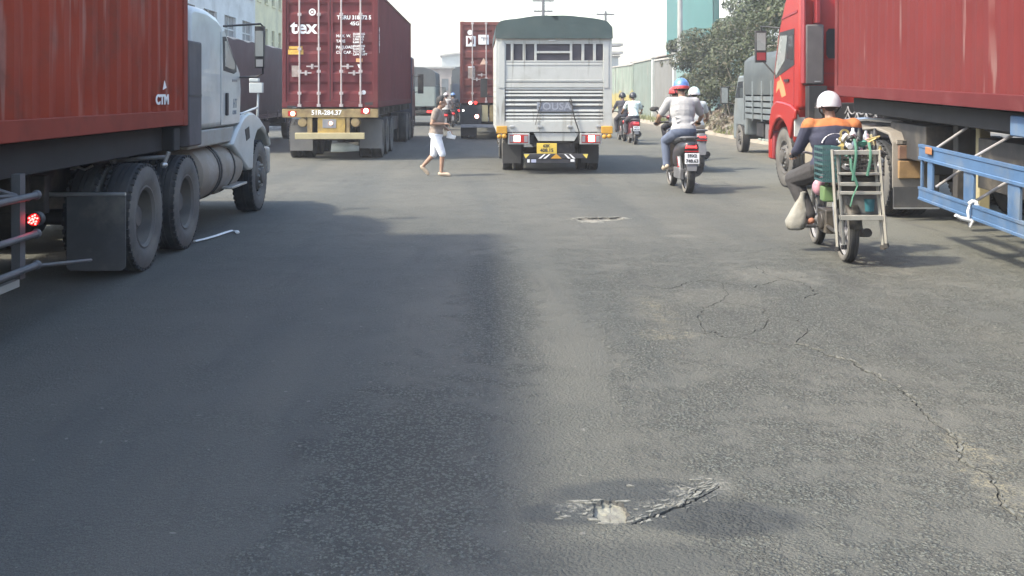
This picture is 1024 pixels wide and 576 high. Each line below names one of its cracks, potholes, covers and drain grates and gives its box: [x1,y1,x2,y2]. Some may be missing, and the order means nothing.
crack [655,265,1024,520]
pothole [555,484,639,525]
